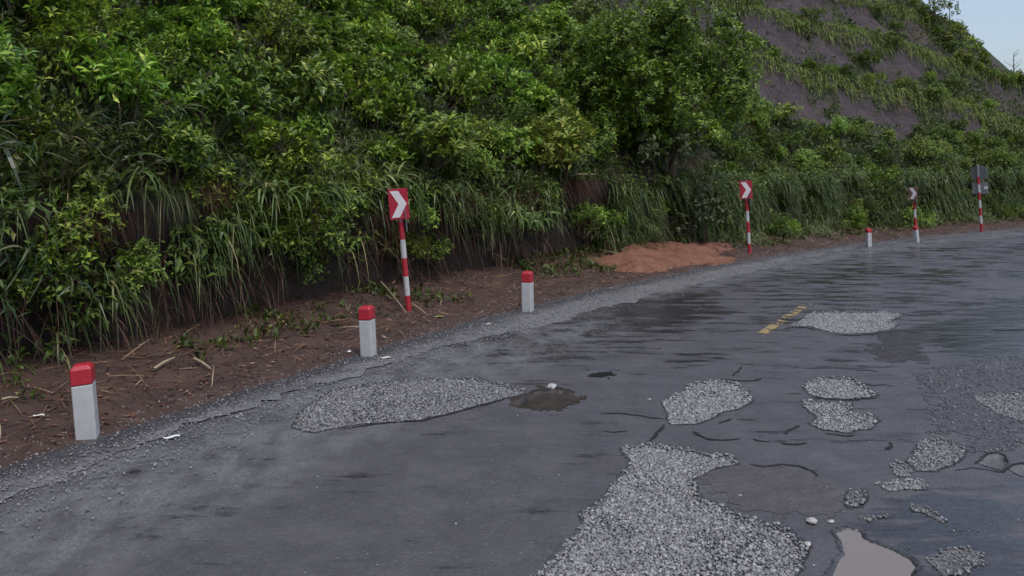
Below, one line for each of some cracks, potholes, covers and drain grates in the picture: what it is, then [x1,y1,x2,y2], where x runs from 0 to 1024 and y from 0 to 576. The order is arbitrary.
pothole [789,310,903,334]
pothole [823,525,924,576]
pothole [843,488,870,509]
pothole [800,399,882,433]
pothole [530,442,813,576]
pothole [802,376,880,399]
pothole [978,455,1010,471]
pothole [873,478,929,492]
crack [604,413,666,445]
pothole [290,377,526,433]
crack [957,452,1024,472]
crack [693,418,807,445]
